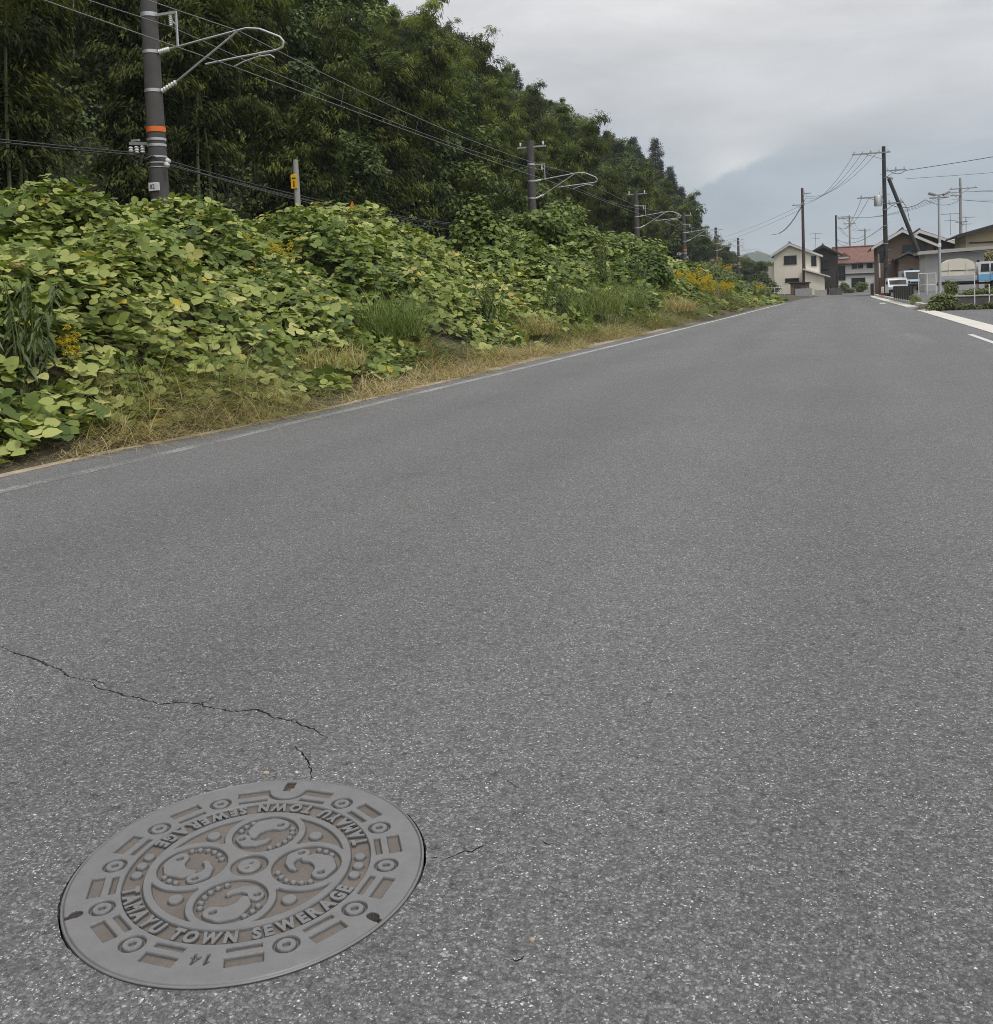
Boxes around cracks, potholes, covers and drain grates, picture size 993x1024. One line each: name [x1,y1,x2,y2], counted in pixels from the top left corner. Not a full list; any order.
crack [2,647,331,744]
manhole cover [57,780,433,990]
